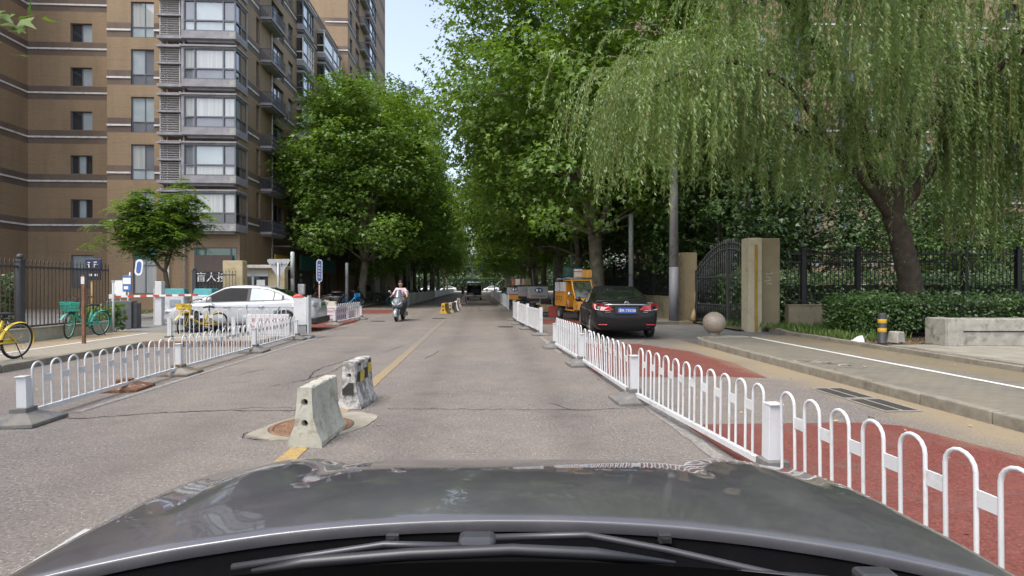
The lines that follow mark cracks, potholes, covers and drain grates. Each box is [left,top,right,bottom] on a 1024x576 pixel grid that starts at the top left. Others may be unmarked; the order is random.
manhole cover [246,412,377,441]
drain grate [811,388,877,399]
drain grate [846,398,923,412]
